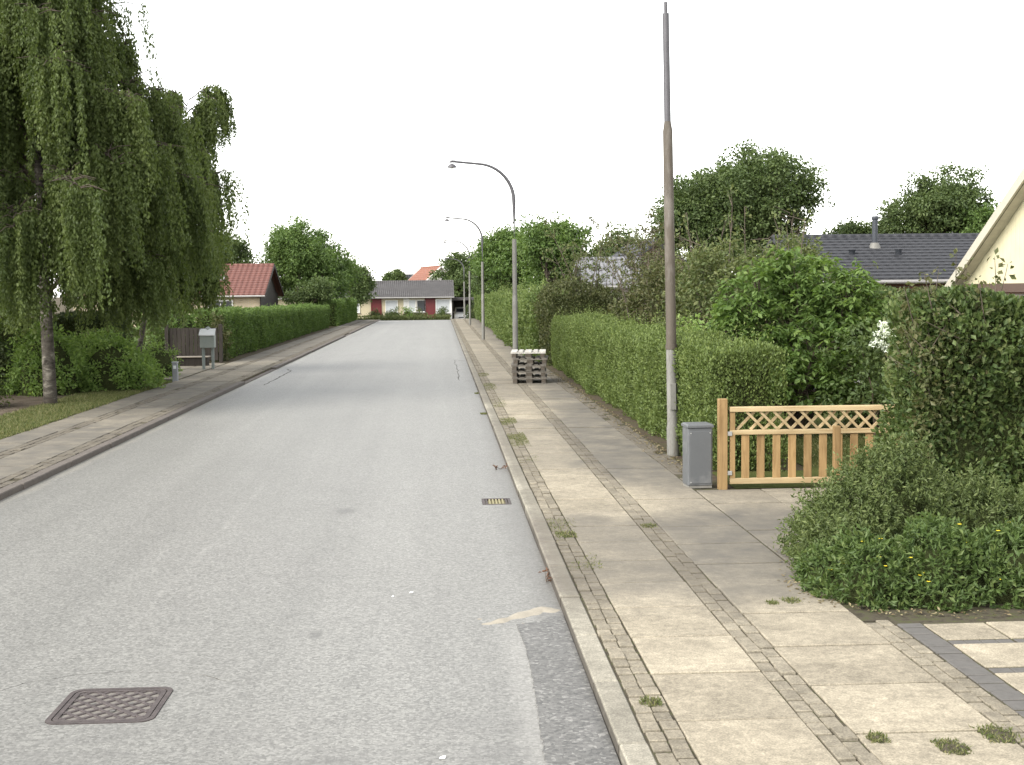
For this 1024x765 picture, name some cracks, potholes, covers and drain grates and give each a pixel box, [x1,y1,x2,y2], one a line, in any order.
manhole cover [45,687,173,725]
